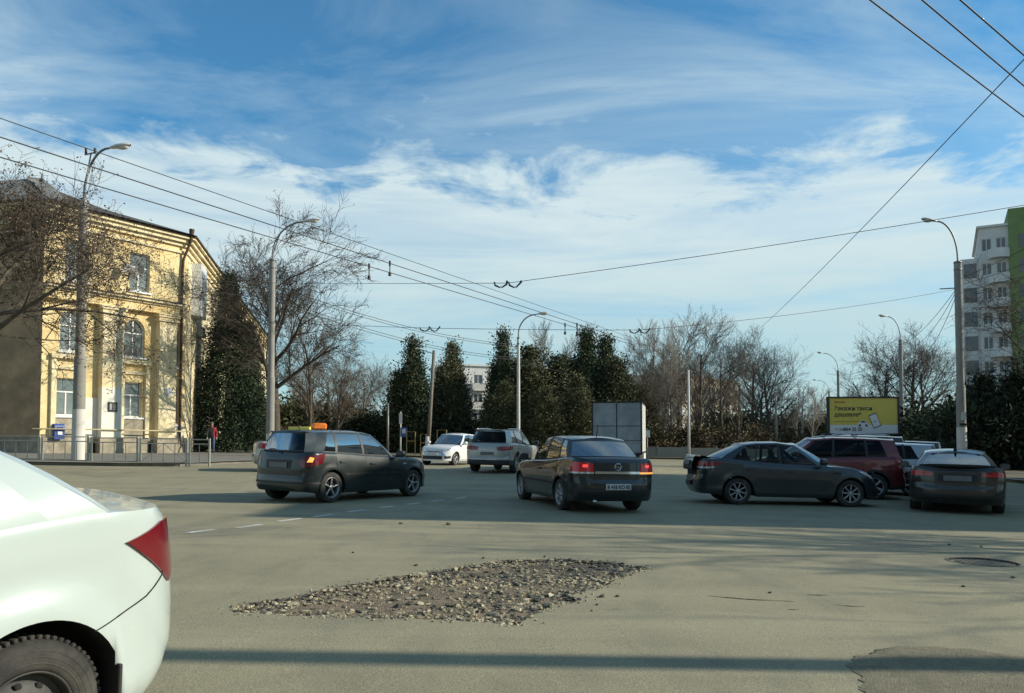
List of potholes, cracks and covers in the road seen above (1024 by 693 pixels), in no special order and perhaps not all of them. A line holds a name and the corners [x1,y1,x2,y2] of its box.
pothole [230,559,646,624]
manhole cover [945,557,1021,567]
